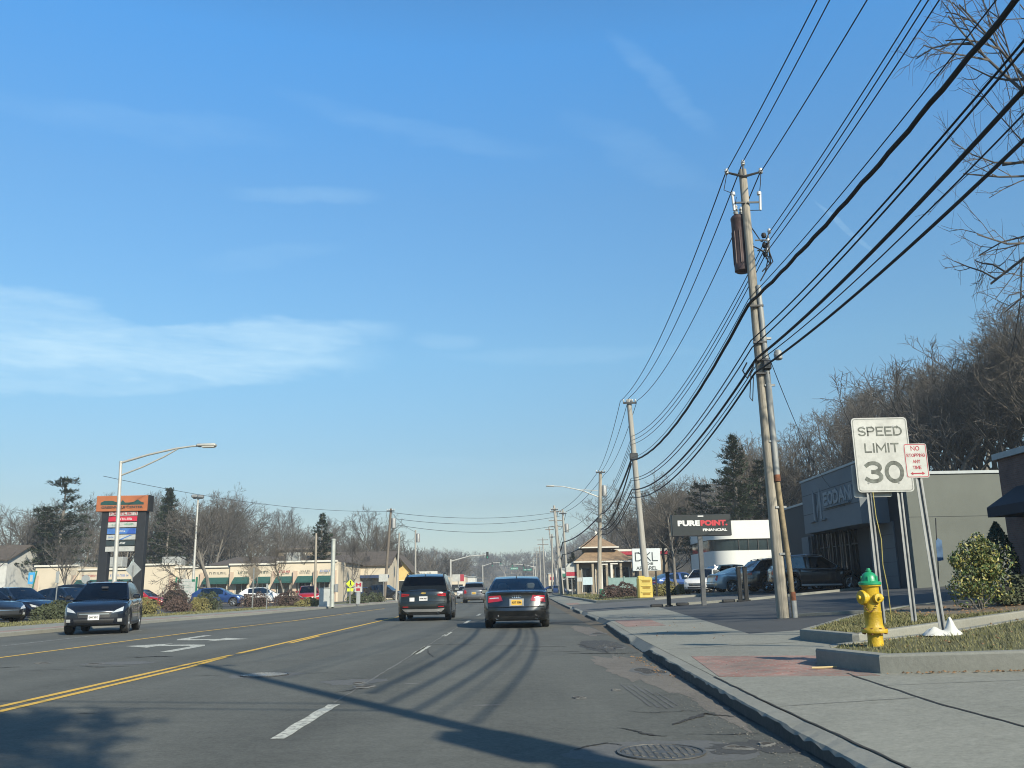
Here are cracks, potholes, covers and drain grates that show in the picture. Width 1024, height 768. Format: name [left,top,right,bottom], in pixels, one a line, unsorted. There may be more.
crack [574,694,744,750]
manhole cover [617,743,706,760]
